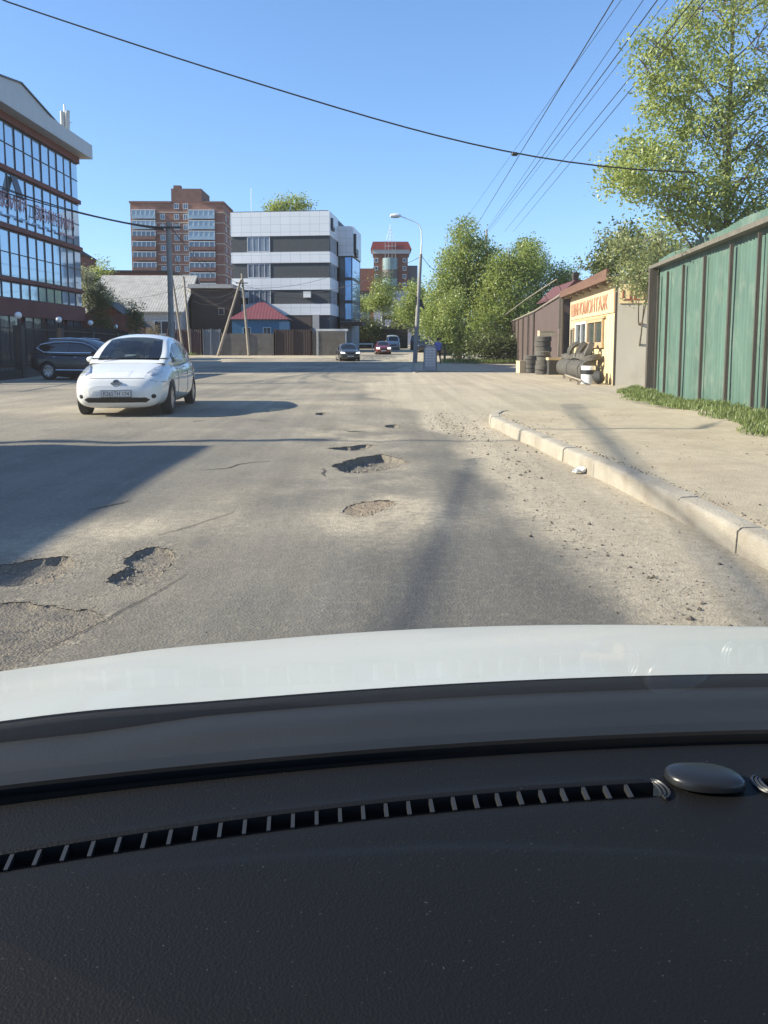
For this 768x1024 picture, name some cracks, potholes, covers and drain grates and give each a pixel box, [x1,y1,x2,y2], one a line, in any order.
pothole [332,455,407,473]
pothole [106,547,176,586]
pothole [0,557,76,587]
crack [21,574,186,662]
pothole [342,501,395,516]
